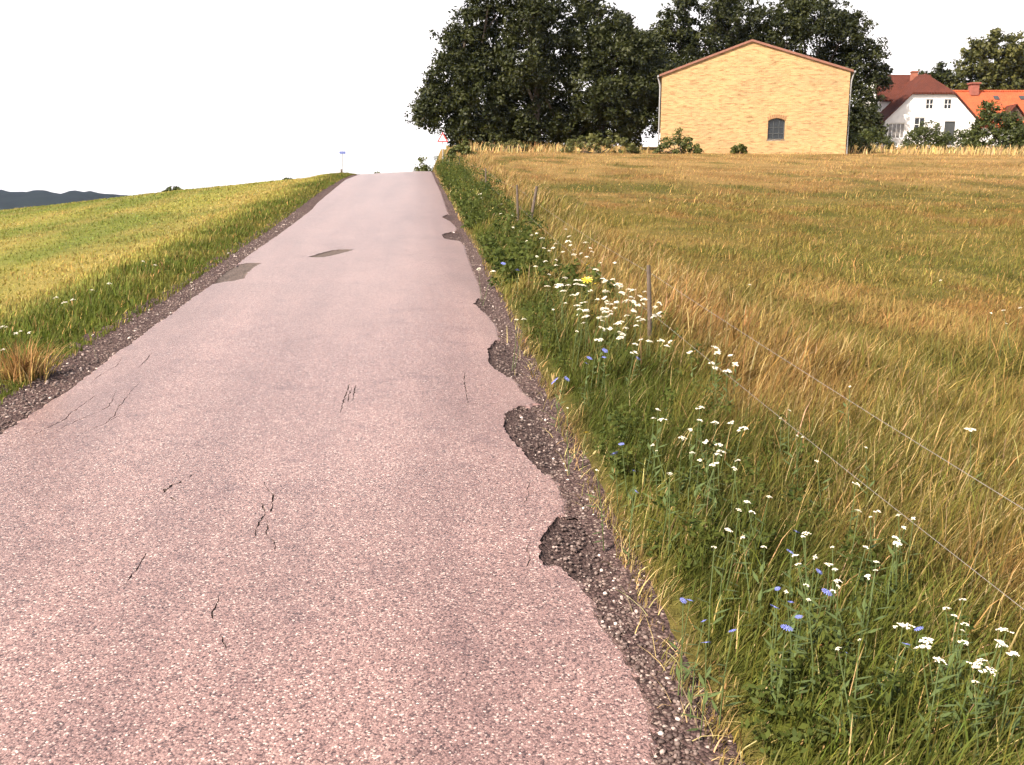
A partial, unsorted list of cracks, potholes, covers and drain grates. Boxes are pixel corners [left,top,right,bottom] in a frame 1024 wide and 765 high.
pothole [503,405,561,475]
pothole [487,340,521,377]
crack [39,356,149,439]
crack [255,482,276,551]
pothole [538,517,600,580]
